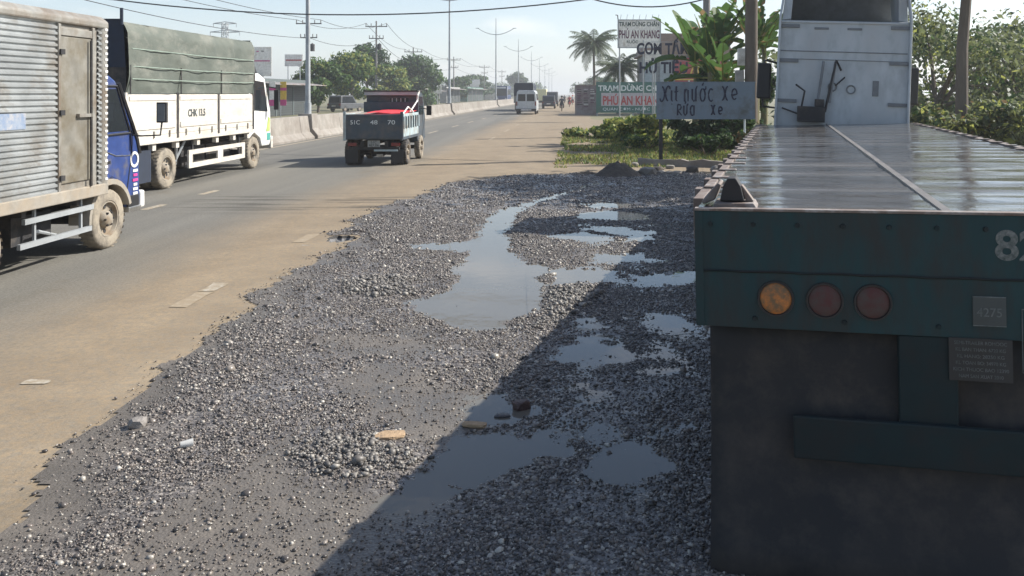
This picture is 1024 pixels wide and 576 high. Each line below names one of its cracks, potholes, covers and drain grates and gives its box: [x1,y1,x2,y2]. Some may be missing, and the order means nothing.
pothole [302,233,361,245]
